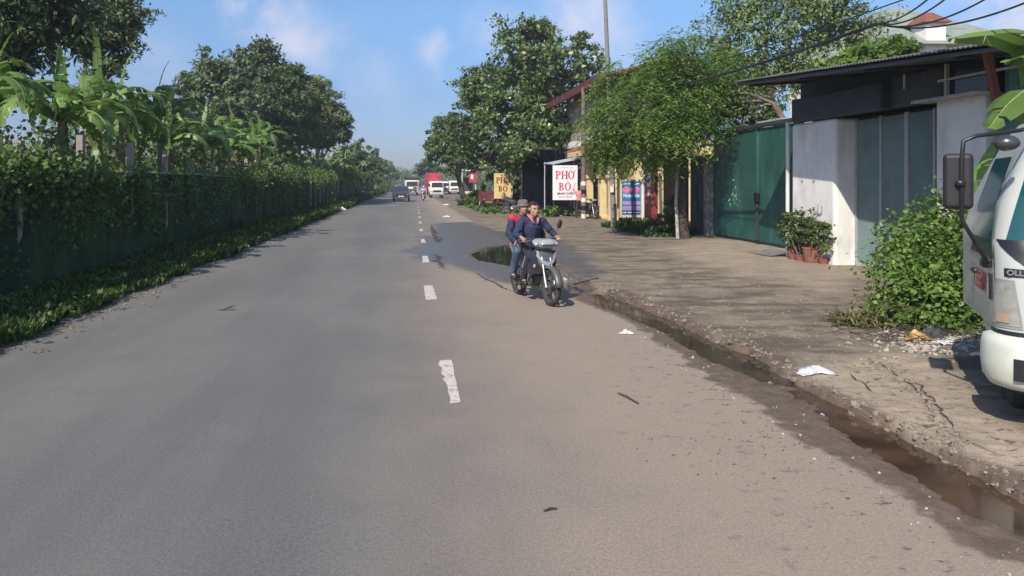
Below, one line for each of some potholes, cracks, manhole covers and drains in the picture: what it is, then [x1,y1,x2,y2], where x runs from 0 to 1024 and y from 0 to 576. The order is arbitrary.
crack [850,358,998,454]
pothole [466,243,521,269]
